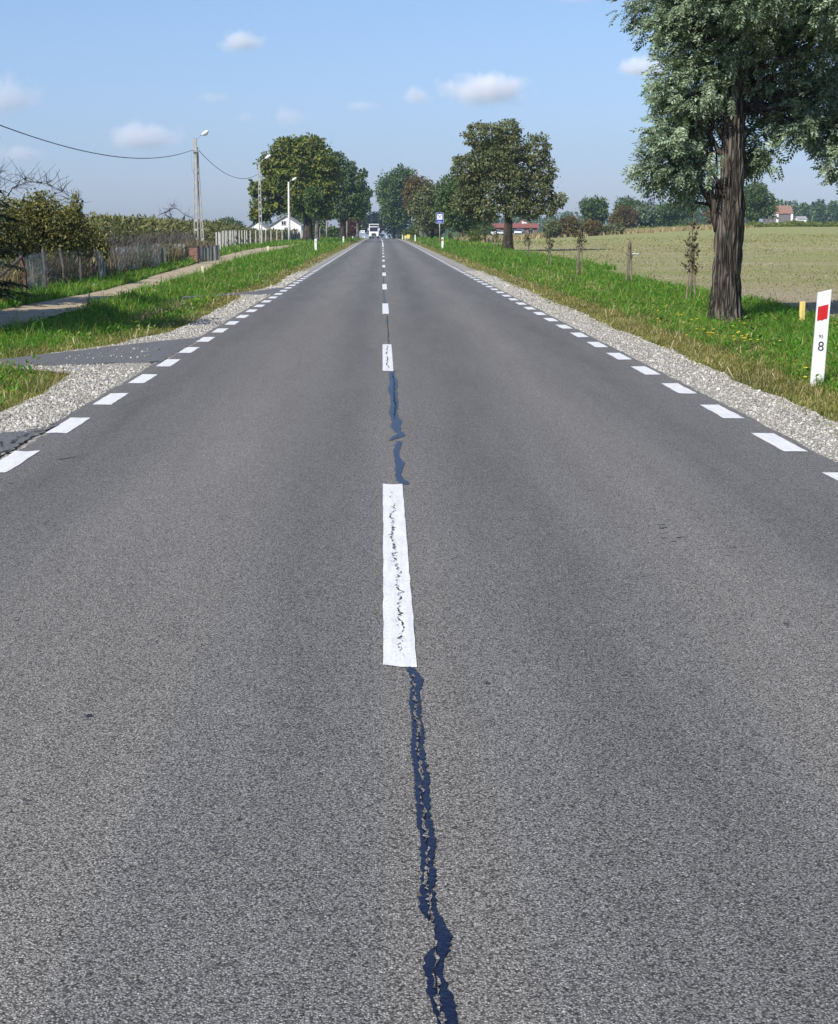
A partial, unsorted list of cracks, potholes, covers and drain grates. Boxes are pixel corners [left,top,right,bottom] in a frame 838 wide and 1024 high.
crack [388,498,404,653]
crack [406,666,457,1024]
crack [383,269,409,484]
